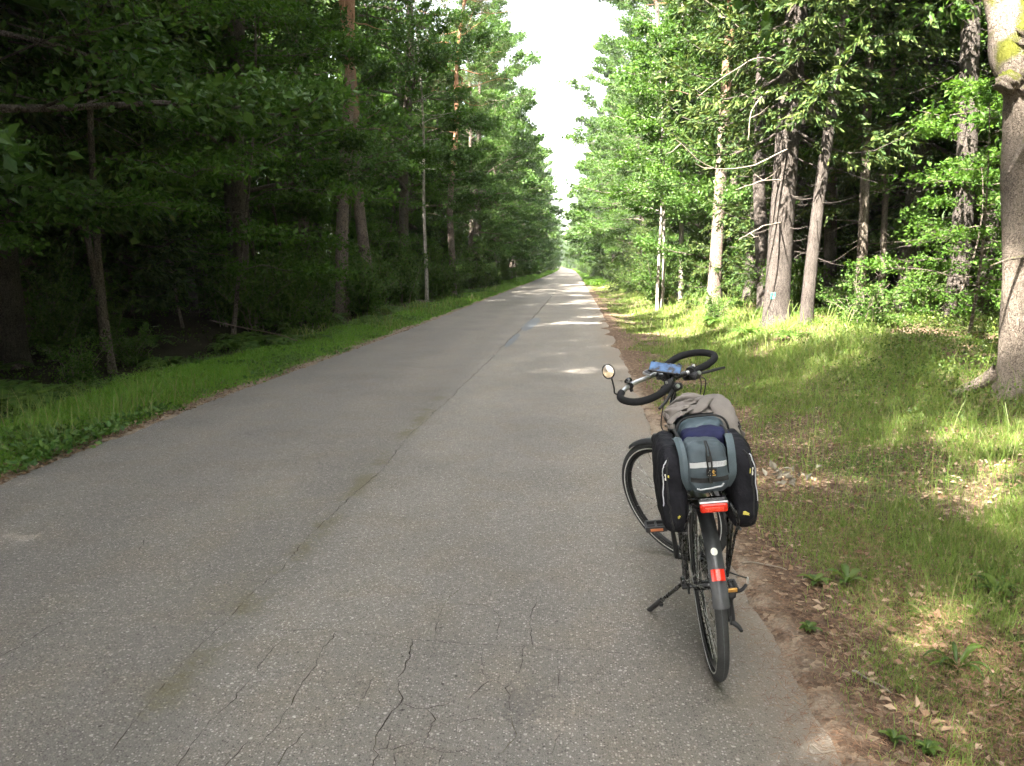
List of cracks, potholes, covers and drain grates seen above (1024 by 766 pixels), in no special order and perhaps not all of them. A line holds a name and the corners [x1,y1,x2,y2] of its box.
crack [177,585,645,766]
